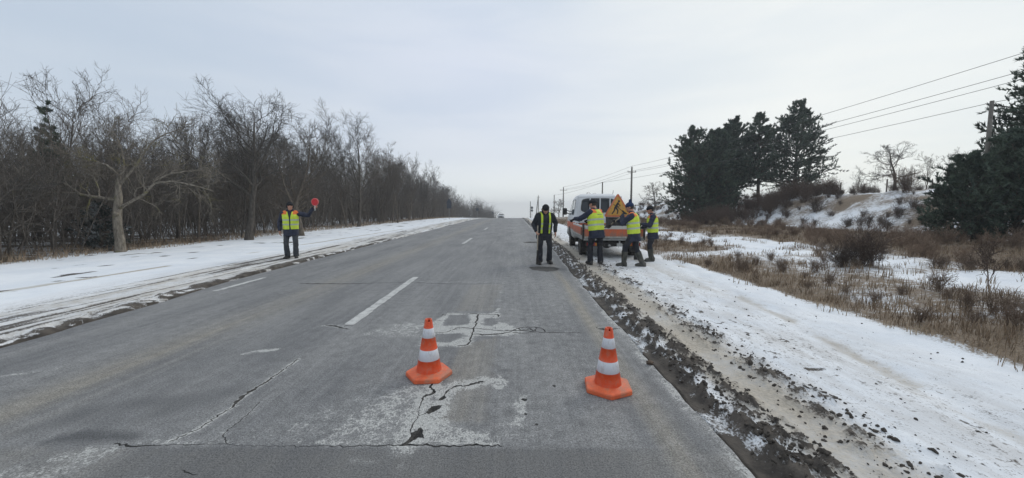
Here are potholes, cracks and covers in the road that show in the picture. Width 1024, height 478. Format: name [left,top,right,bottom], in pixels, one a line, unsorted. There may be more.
crack [440,313,579,346]
crack [114,359,502,448]
